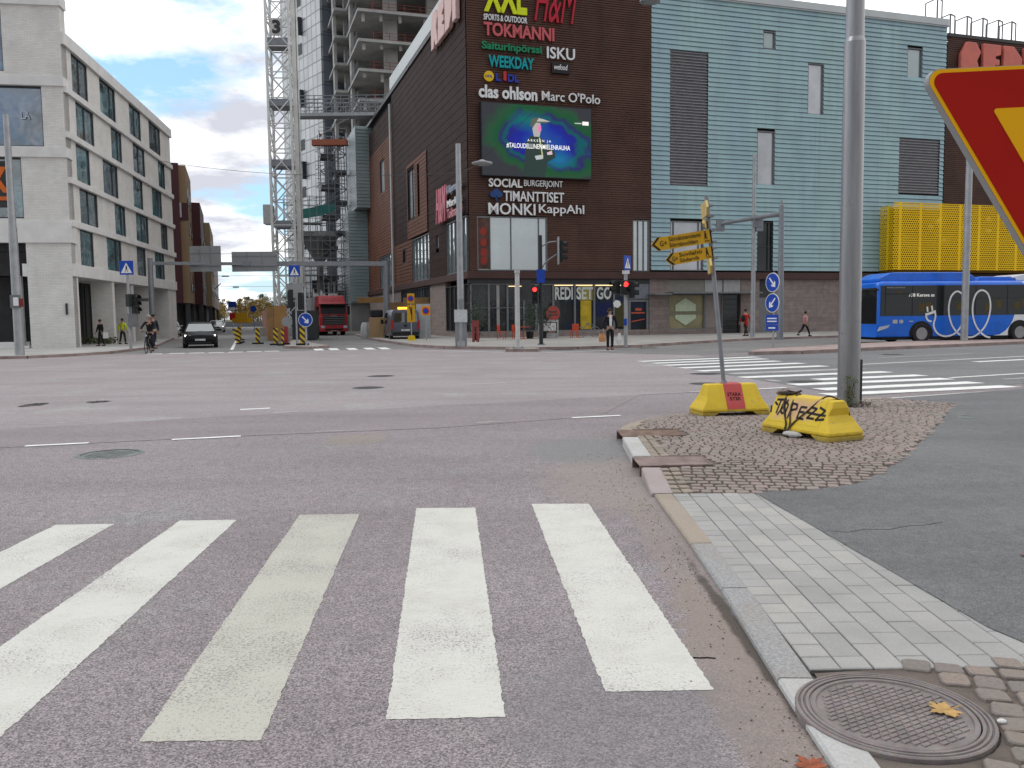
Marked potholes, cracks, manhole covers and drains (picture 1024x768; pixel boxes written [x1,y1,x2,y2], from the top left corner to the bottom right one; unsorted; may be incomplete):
manhole cover [795,673,999,765]
manhole cover [75,449,145,459]
